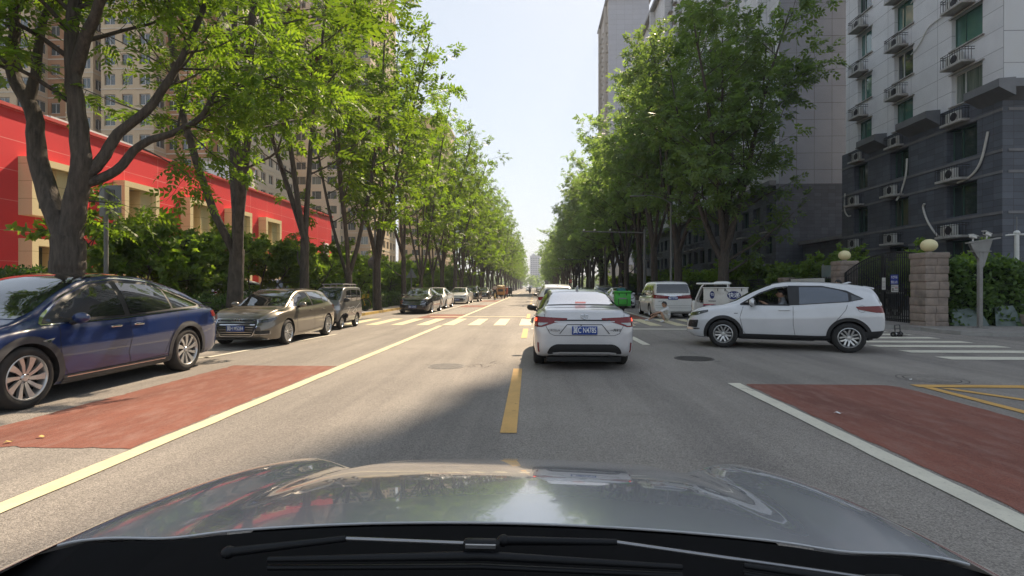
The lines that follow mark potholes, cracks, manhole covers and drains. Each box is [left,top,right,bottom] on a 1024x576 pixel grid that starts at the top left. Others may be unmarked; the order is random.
manhole cover [895,374,970,384]
